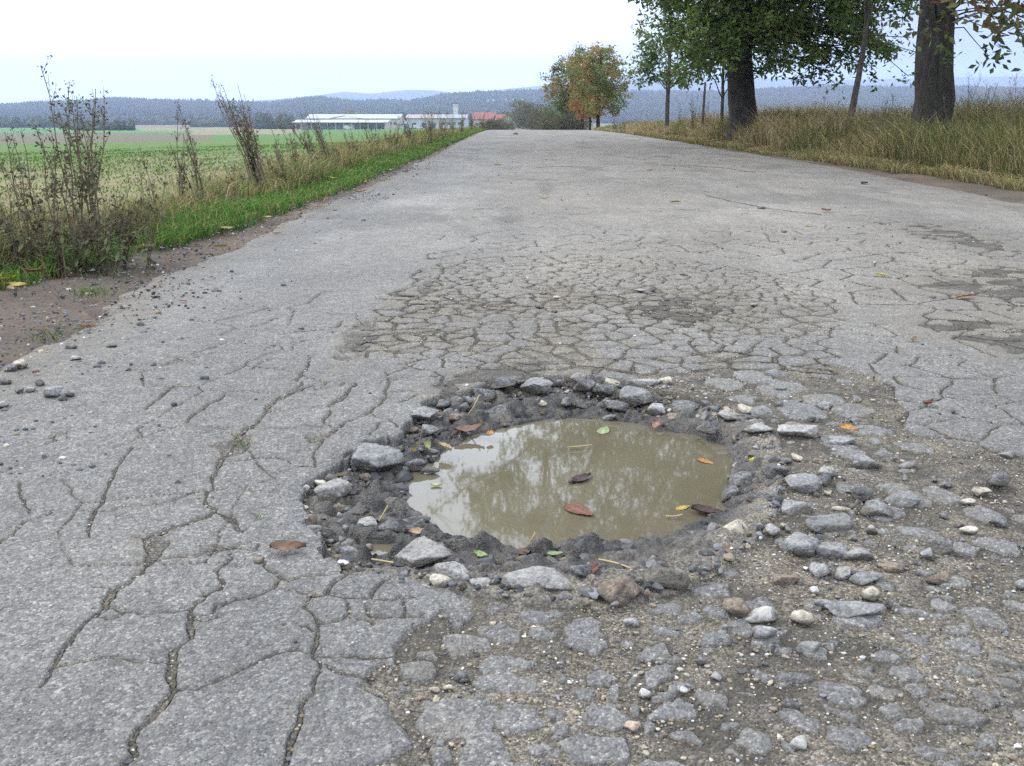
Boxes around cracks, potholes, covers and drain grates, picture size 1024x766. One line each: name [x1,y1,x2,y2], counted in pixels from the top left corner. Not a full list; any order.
crack [0,189,1024,766]
pothole [303,381,786,612]
